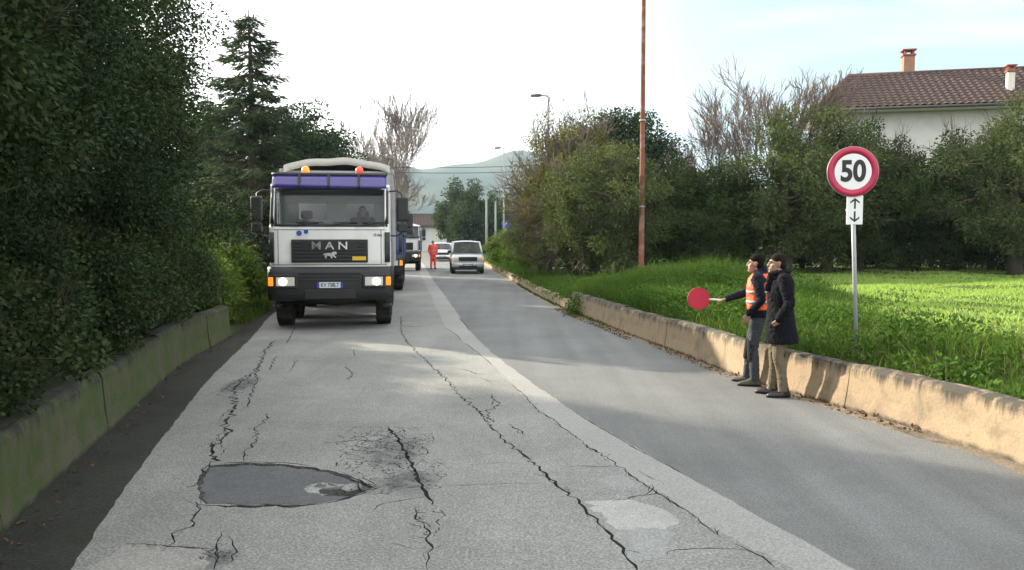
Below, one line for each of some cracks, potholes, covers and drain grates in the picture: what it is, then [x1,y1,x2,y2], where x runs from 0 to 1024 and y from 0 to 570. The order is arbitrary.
crack [208,337,296,466]
crack [324,427,449,569]
crack [143,485,238,570]
crack [399,316,639,570]
pothole [195,462,380,508]
